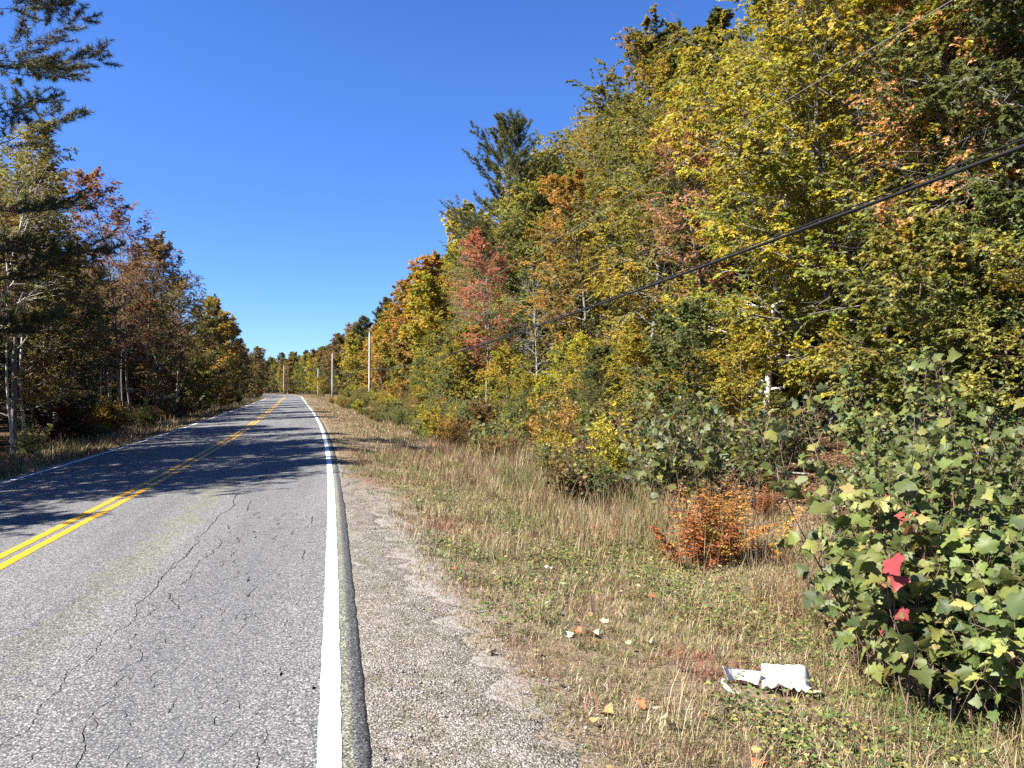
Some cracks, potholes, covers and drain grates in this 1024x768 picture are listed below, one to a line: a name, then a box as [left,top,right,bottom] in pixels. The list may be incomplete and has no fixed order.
crack [0,479,321,768]
